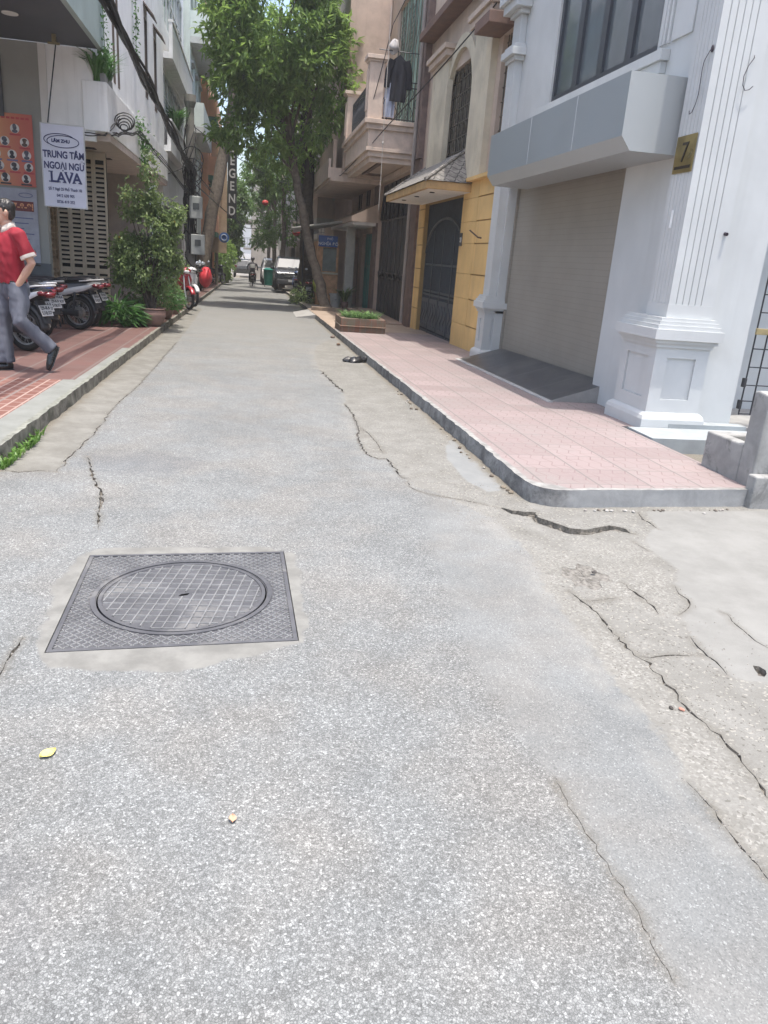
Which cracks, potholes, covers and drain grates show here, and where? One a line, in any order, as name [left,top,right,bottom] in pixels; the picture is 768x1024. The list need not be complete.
crack [689,784,768,879]
manhole cover [46,551,298,653]
crack [571,587,768,798]
crack [88,458,104,527]
crack [320,370,470,502]
crack [502,508,656,549]
crack [0,638,23,675]
